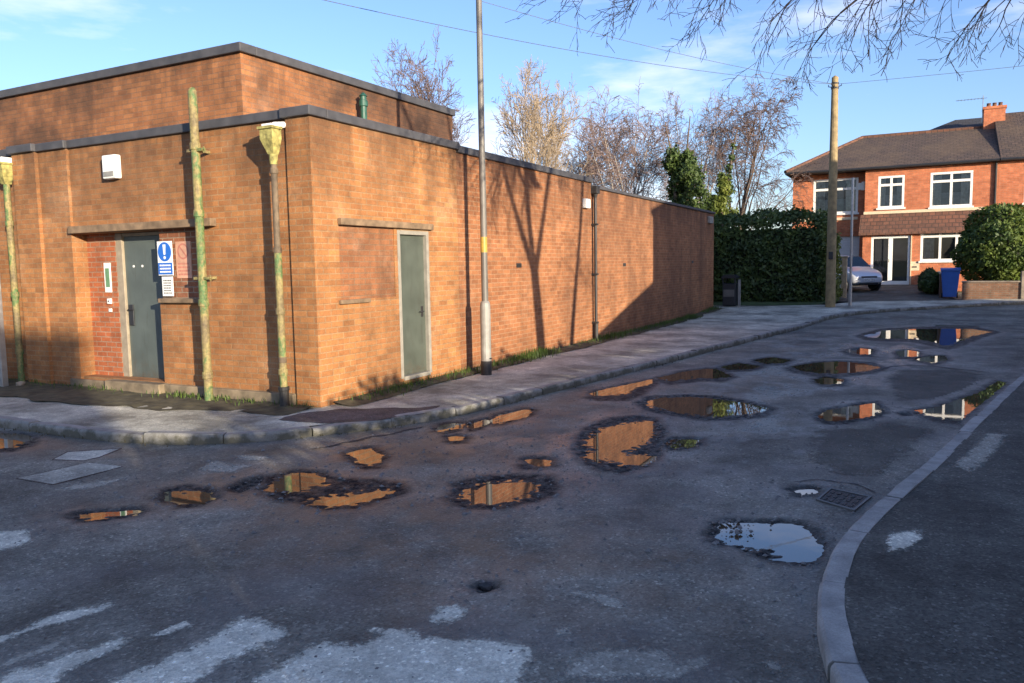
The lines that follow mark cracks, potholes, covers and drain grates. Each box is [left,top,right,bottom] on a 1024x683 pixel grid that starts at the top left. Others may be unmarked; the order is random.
pothole [329,444,401,474]
pothole [248,466,425,517]
pothole [459,416,499,434]
pothole [648,367,745,387]
pothole [687,513,841,575]
pothole [138,482,231,513]
pothole [0,430,51,455]
pothole [801,400,898,427]
pothole [420,419,468,435]
